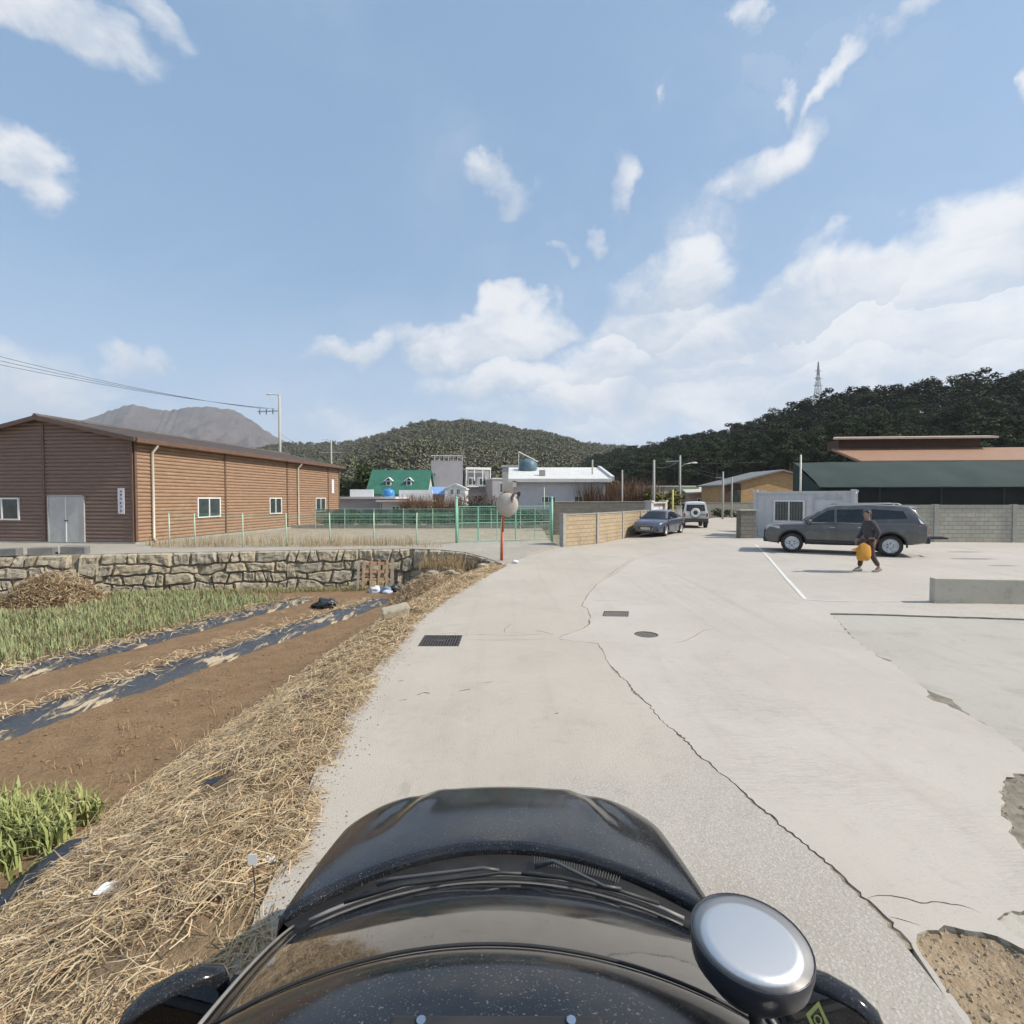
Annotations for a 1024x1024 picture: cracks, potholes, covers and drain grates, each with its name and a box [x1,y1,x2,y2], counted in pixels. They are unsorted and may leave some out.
crack [831,613,1024,725]
pothole [916,925,1024,1024]
pothole [1000,775,1024,849]
drain grate [418,635,463,646]
crack [477,559,978,949]
